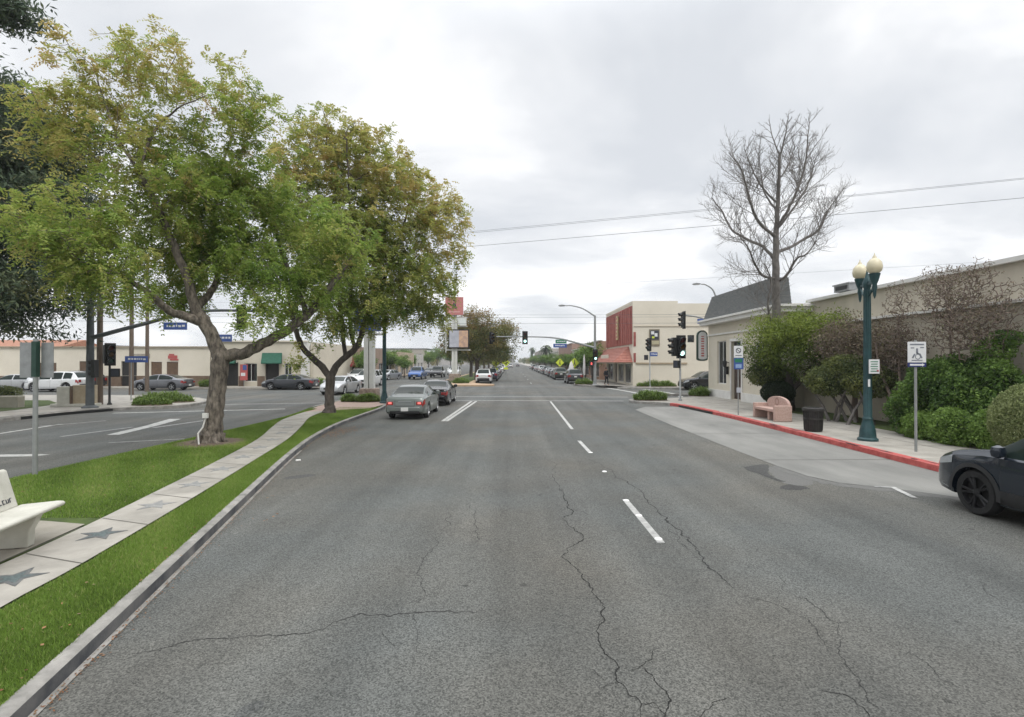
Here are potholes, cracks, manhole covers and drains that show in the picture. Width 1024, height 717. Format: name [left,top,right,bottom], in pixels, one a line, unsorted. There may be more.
crack [545,455,683,717]
crack [743,570,885,716]
crack [124,512,497,660]
